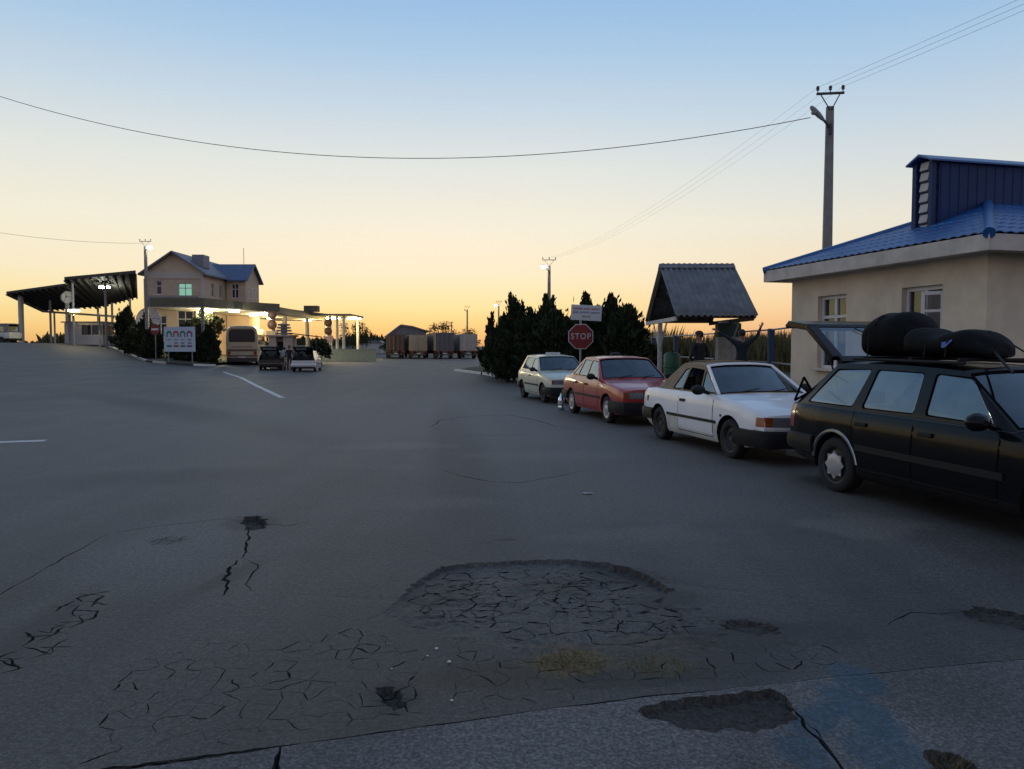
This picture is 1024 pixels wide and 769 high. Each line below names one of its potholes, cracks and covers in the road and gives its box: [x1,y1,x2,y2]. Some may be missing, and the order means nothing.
pothole [638,688,799,733]
crack [407,569,695,645]
crack [80,628,429,764]
pothole [375,686,408,711]
pothole [923,749,977,769]
crack [221,524,295,596]
crack [449,643,838,713]
pothole [718,619,782,636]
crack [442,469,581,483]
pothole [961,605,1024,631]
pothole [240,516,268,530]
crack [784,693,844,769]
